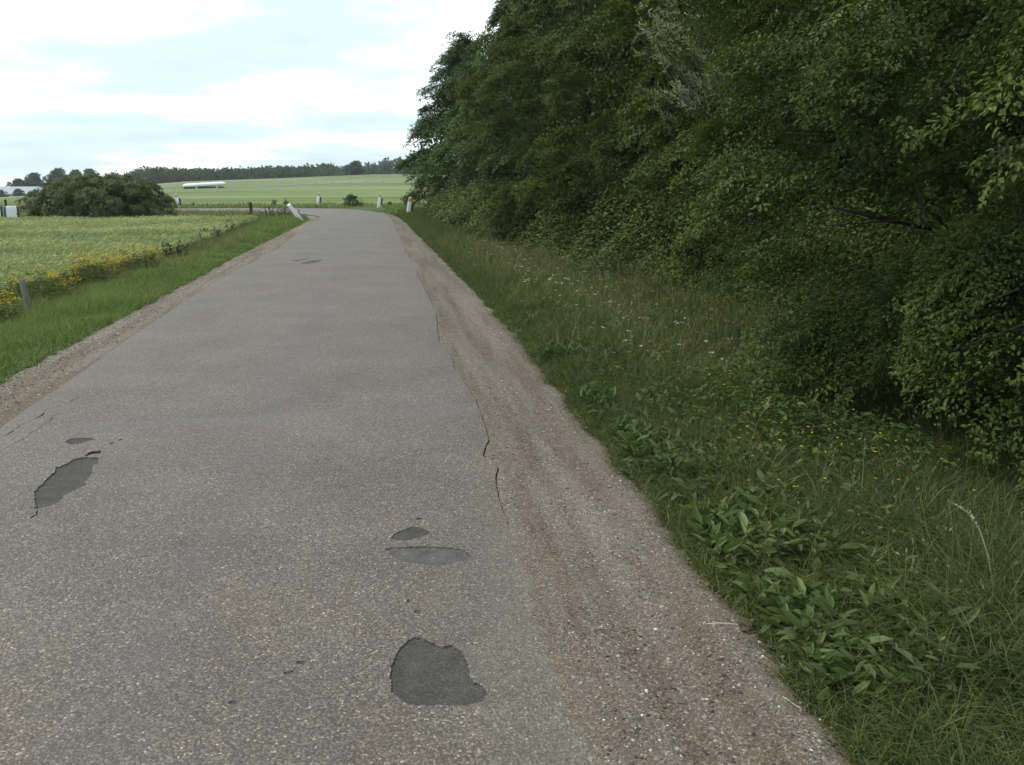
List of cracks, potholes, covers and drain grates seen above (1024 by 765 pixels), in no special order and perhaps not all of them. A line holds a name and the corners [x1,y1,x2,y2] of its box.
pothole [34,457,99,509]
crack [1,399,74,451]
pothole [389,637,488,706]
